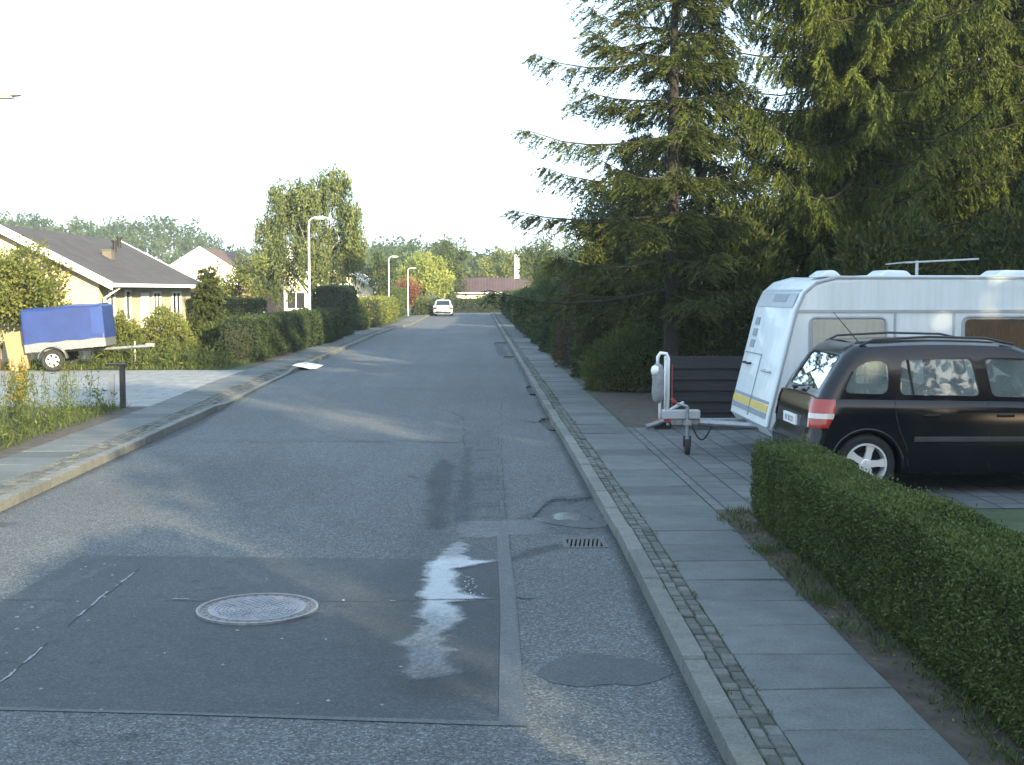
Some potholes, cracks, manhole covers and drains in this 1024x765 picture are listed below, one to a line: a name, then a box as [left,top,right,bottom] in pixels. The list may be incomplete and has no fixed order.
pothole [538,418,555,430]
drain grate [561,538,608,548]
manhole cover [196,593,318,626]
